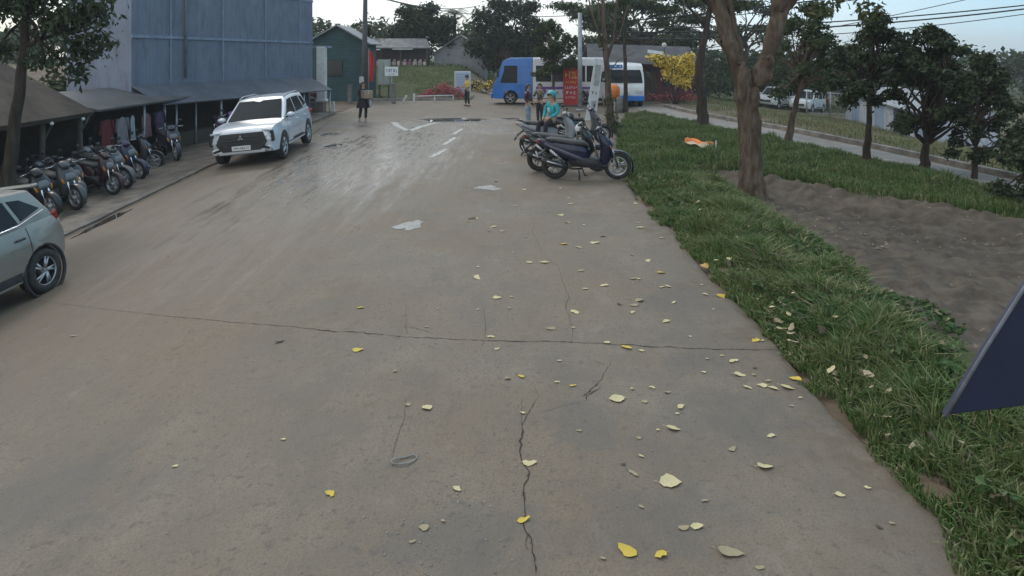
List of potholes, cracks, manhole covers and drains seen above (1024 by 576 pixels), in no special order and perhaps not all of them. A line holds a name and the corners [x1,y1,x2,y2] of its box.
crack [518,360,606,570]
